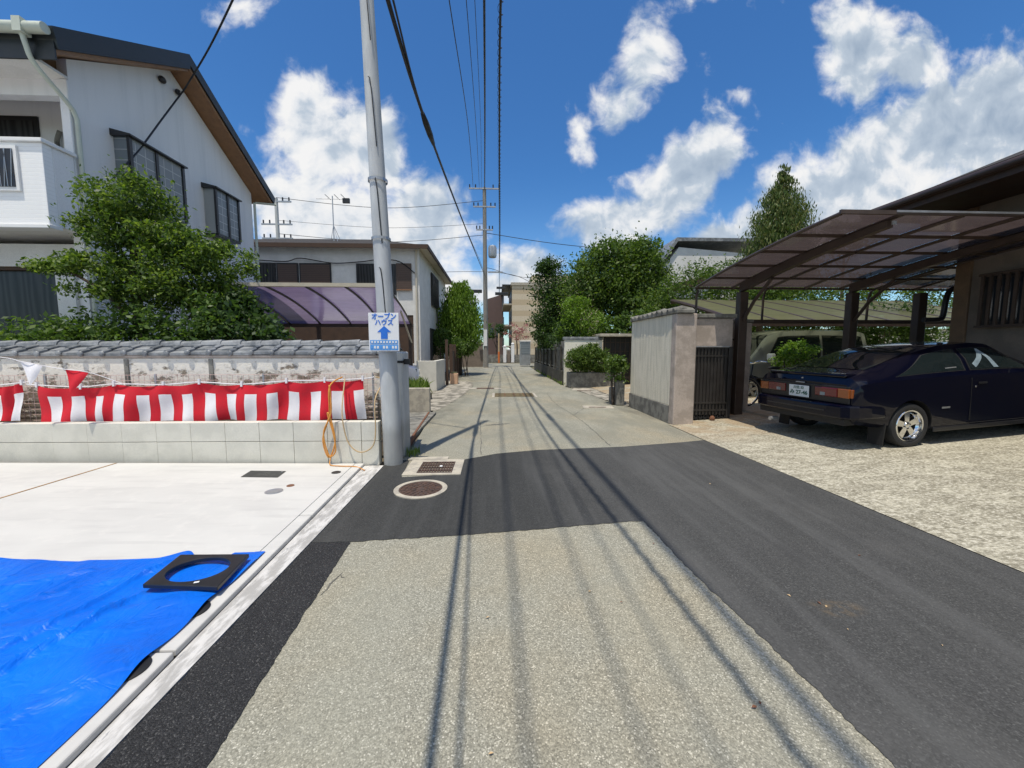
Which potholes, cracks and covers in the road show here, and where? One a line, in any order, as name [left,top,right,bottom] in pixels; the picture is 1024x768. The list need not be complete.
manhole cover [393,480,447,499]
drain grate [402,456,465,476]
